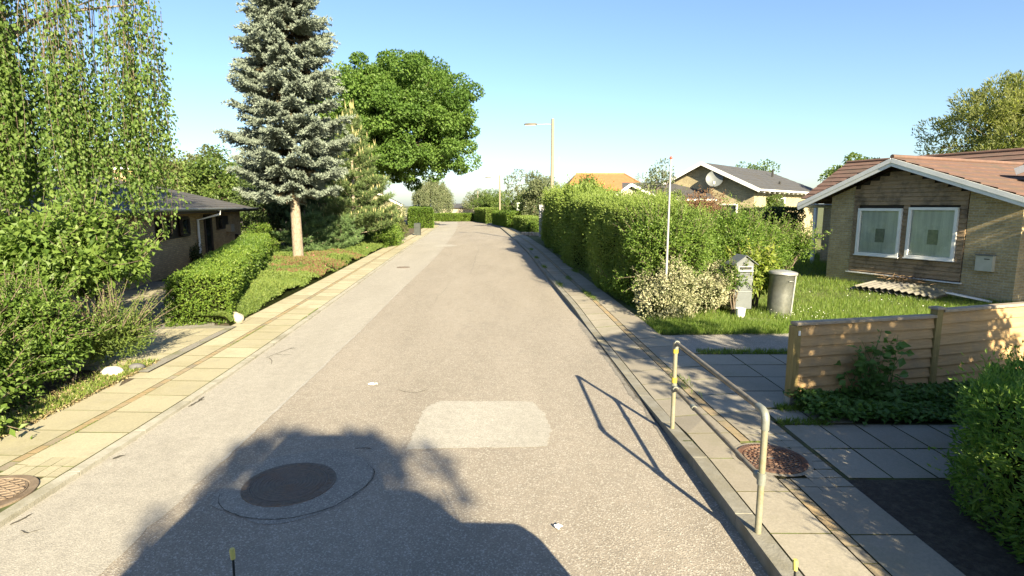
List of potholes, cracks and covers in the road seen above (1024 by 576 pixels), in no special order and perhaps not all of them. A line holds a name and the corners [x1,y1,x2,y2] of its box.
manhole cover [0,475,40,508]
manhole cover [737,444,809,474]
manhole cover [240,463,336,507]
